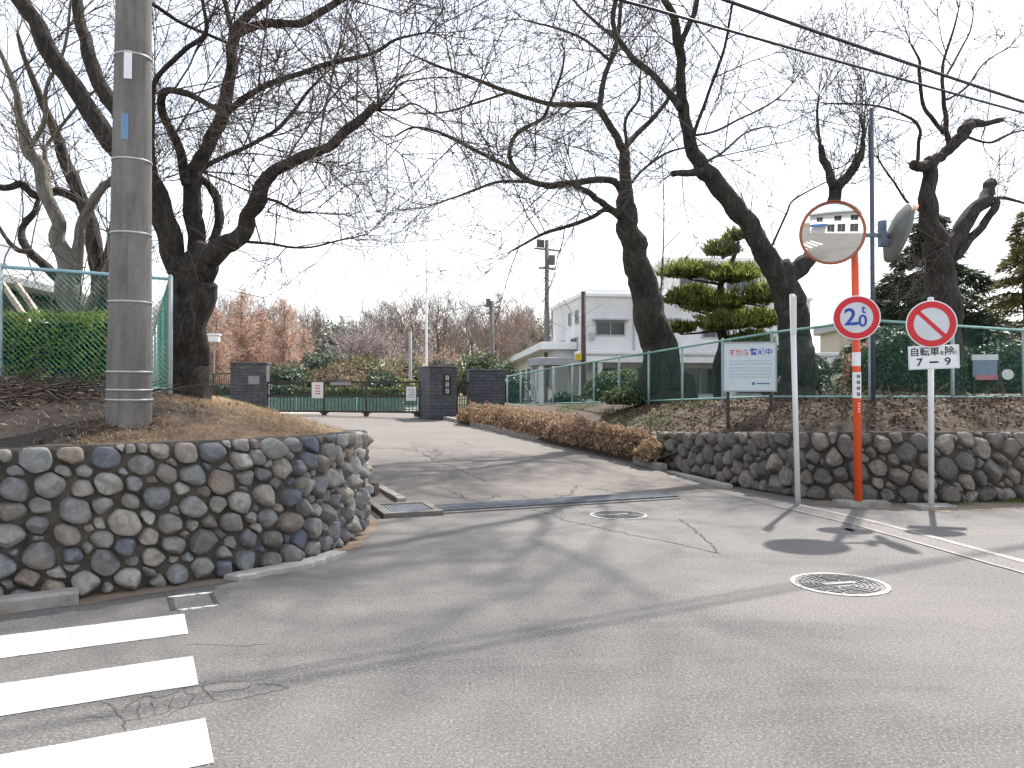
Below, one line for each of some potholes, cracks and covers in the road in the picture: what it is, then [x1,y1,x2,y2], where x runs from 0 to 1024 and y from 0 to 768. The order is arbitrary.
crack [78,677,290,731]
crack [410,450,529,499]
manhole cover [790,573,891,597]
manhole cover [590,510,648,520]
